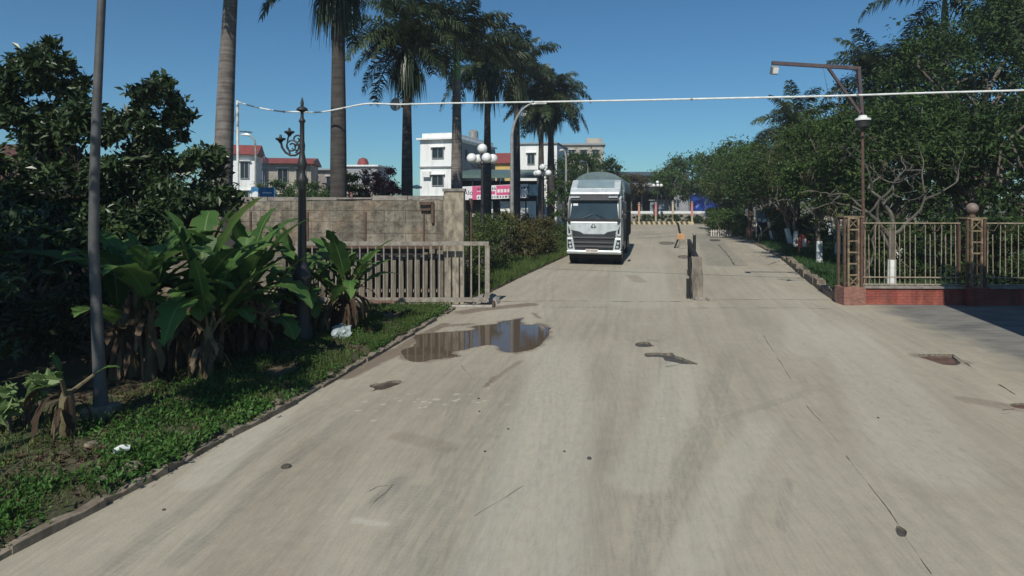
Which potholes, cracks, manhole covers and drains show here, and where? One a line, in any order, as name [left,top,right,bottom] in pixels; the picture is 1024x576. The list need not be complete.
pothole [401,318,551,362]
pothole [370,380,402,391]
pothole [644,352,697,364]
crack [766,340,932,574]
